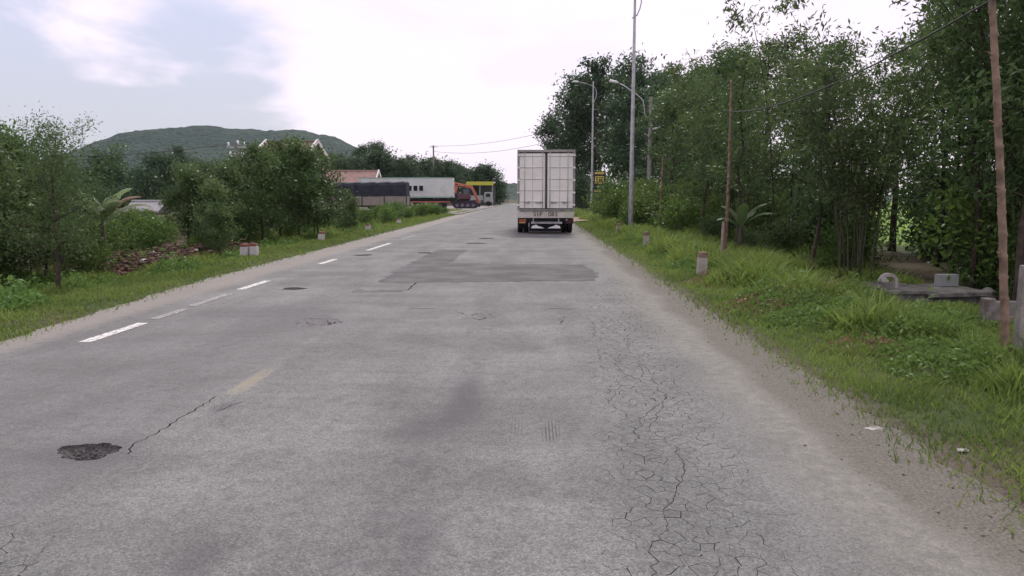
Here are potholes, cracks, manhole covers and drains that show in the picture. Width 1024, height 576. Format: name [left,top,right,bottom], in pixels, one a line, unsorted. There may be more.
crack [586,279,798,576]
pothole [295,318,342,328]
pothole [57,443,122,461]
crack [128,397,240,454]
crack [0,518,55,576]
